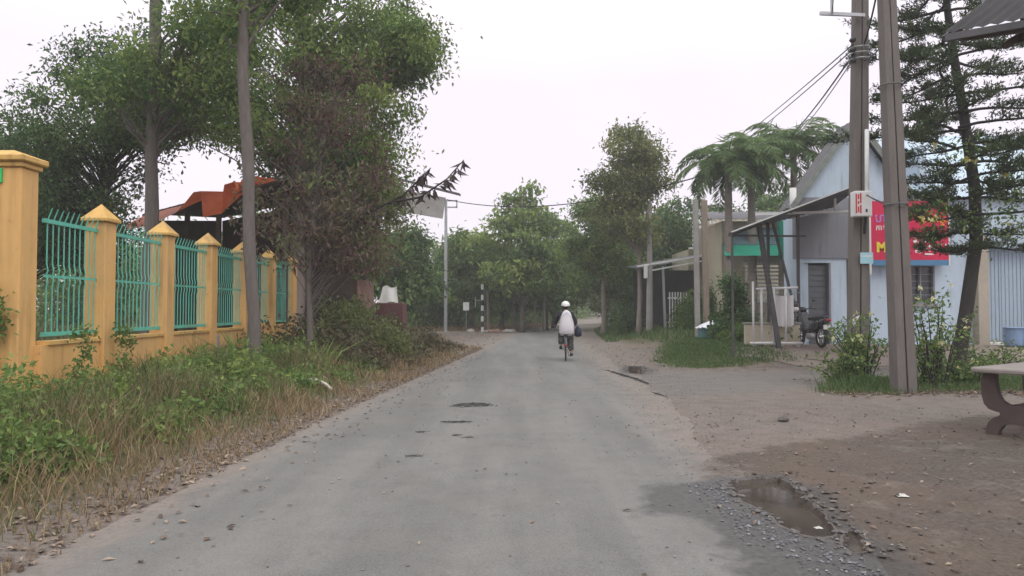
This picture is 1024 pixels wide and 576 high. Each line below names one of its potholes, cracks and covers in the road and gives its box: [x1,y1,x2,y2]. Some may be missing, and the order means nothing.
pothole [718,476,839,543]
